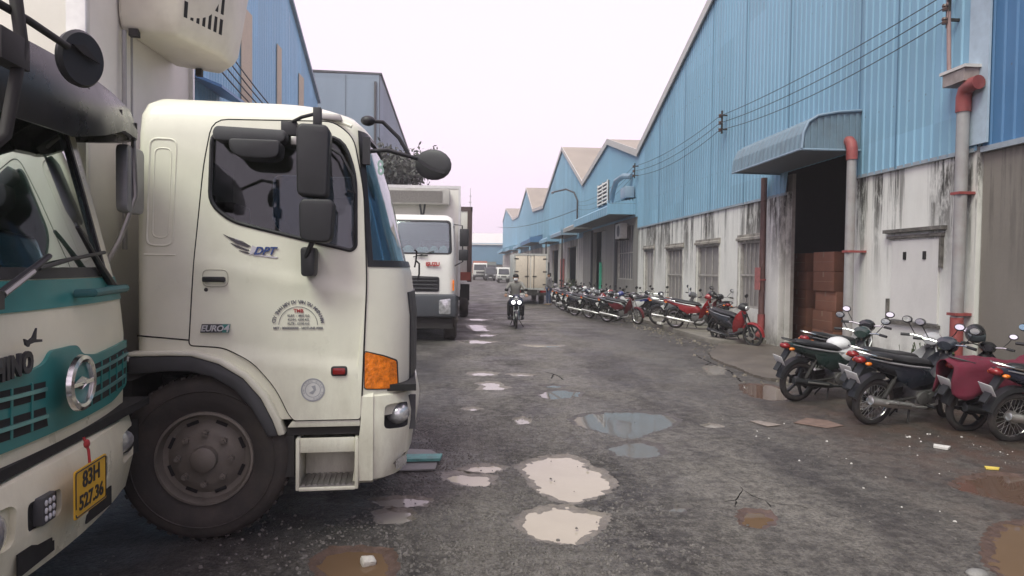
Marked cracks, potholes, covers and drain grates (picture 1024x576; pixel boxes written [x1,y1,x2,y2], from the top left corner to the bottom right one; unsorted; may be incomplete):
pothole [474,381,513,390]
pothole [734,508,779,529]
pothole [533,388,585,399]
crack [724,487,808,509]
pothole [948,471,1024,506]
pothole [513,453,620,505]
pothole [512,416,533,425]
pothole [464,323,495,331]
pothole [604,439,669,459]
pothole [978,519,1024,576]
pothole [308,544,401,576]
pothole [456,463,508,473]
